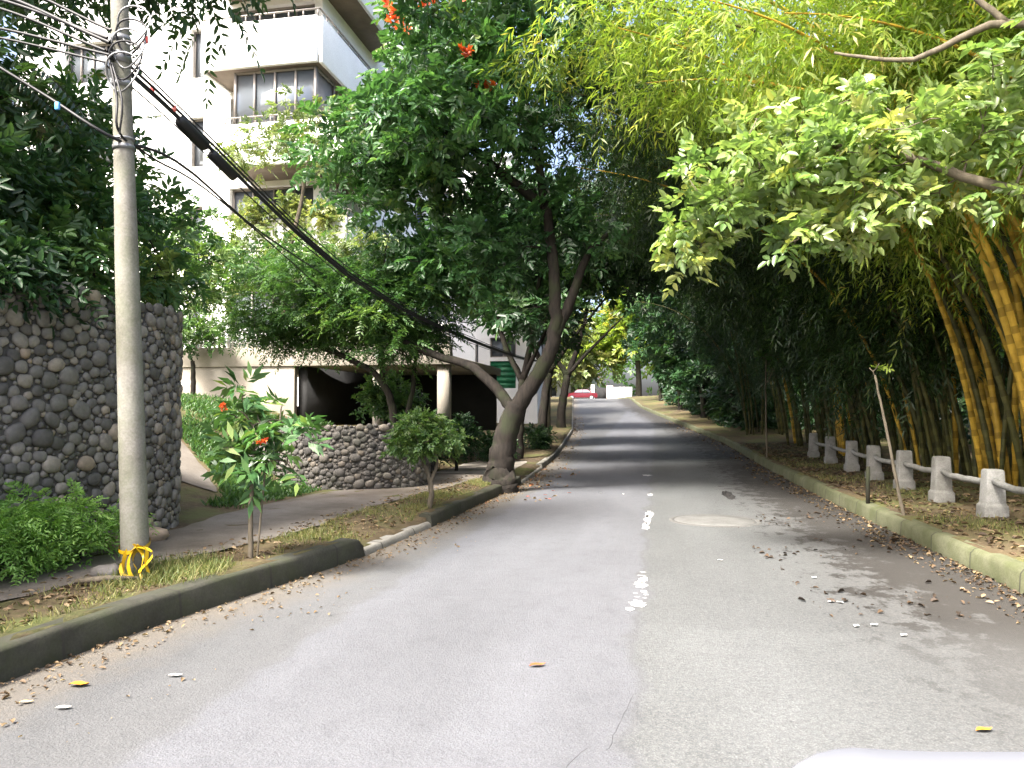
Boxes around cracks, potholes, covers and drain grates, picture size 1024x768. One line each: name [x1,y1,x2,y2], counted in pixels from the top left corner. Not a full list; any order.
manhole cover [669,514,762,527]
